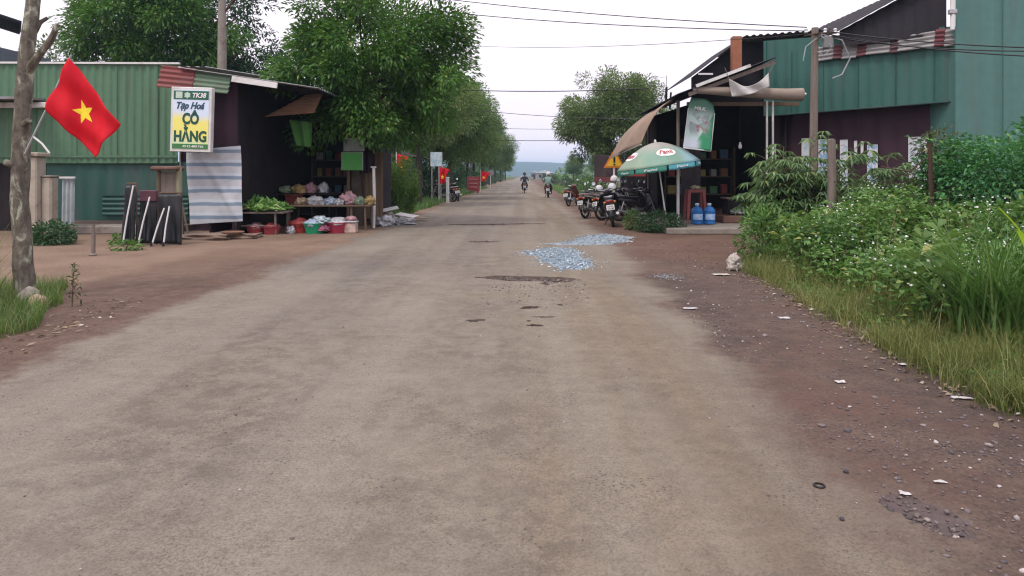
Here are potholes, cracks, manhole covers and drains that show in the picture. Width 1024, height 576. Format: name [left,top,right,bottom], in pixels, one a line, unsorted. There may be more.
pothole [474,275,579,285]
